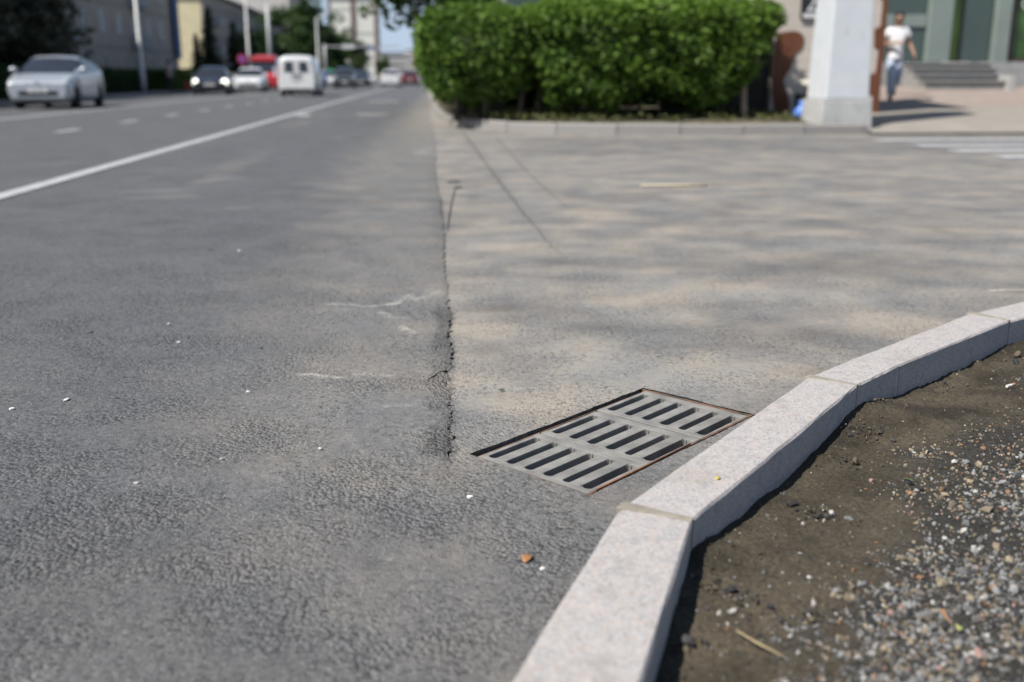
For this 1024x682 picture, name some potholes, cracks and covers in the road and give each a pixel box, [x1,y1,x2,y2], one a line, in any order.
drain grate [470,388,755,495]
